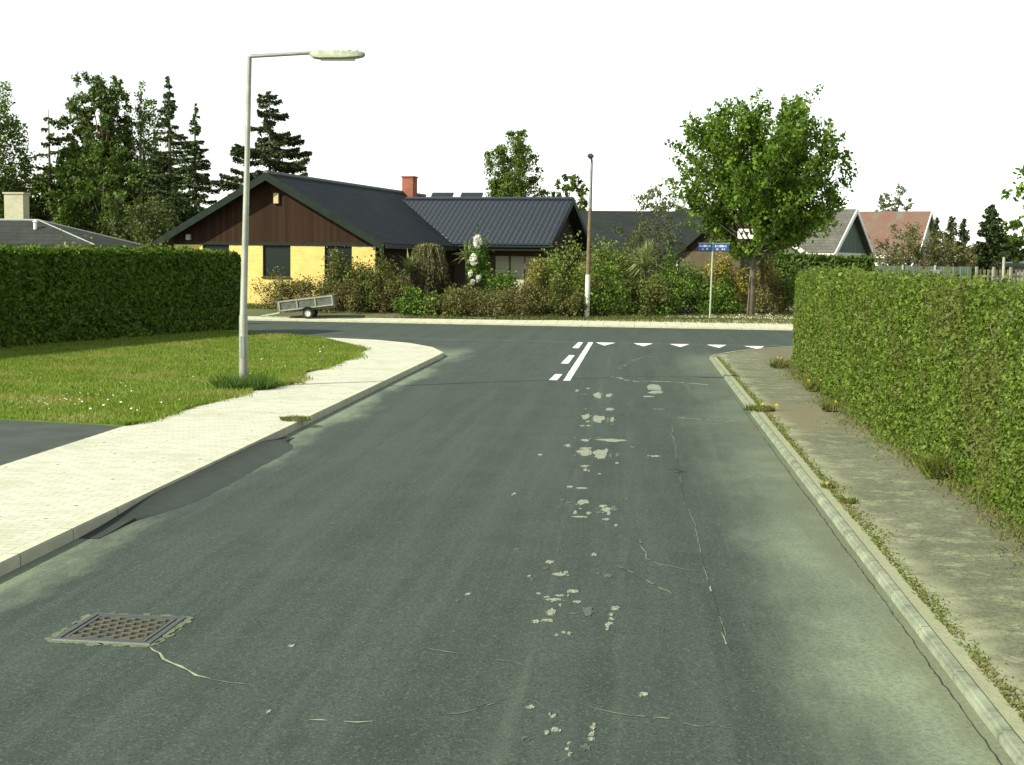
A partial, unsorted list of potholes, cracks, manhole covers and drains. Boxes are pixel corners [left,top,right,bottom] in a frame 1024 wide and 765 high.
crack [150,647,245,684]
crack [617,417,732,653]
crack [580,703,736,729]
crack [439,697,511,715]
